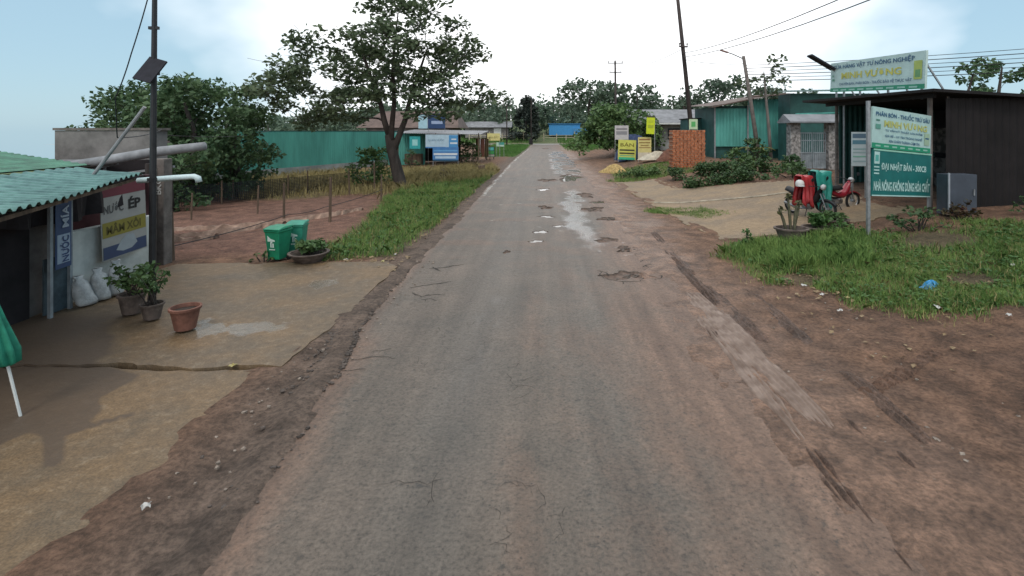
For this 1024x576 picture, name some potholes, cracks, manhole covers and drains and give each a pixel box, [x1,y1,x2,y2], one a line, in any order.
crack [411,264,463,301]
crack [492,477,565,554]
pothole [597,270,658,280]
